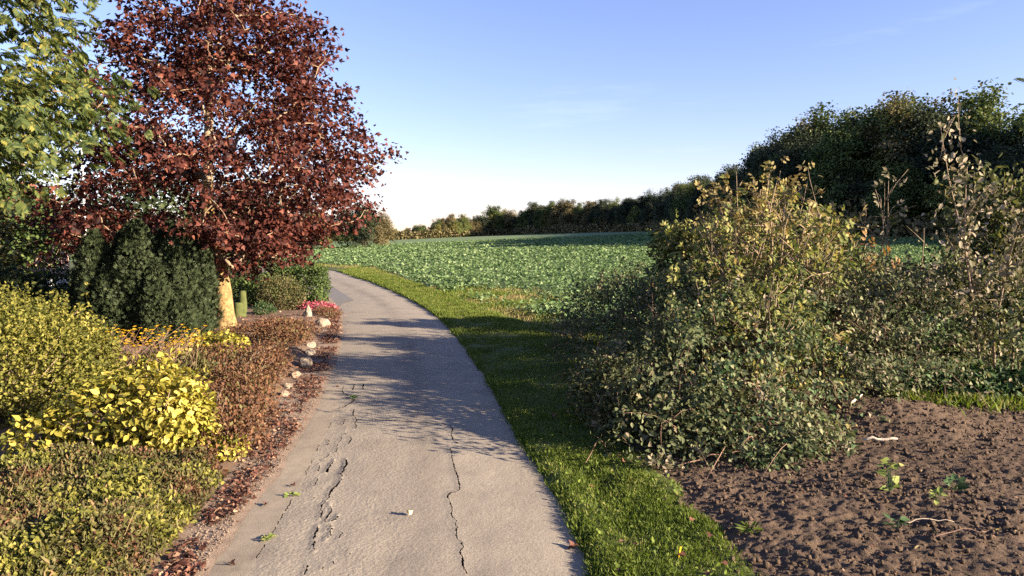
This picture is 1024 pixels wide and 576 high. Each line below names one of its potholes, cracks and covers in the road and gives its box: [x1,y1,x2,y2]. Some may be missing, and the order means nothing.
crack [304,385,467,575]
